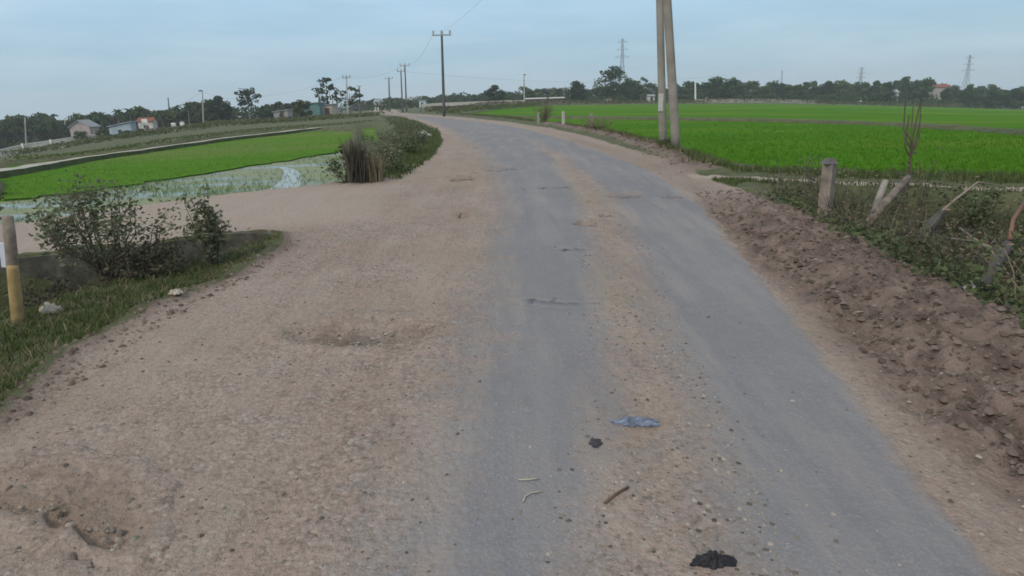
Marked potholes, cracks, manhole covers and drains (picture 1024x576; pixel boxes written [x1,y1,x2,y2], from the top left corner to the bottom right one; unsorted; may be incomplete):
crack [492,295,616,309]
pothole [256,309,455,356]
pothole [0,444,184,570]
crack [476,166,584,191]
crack [540,246,601,254]
pothole [433,173,490,184]
